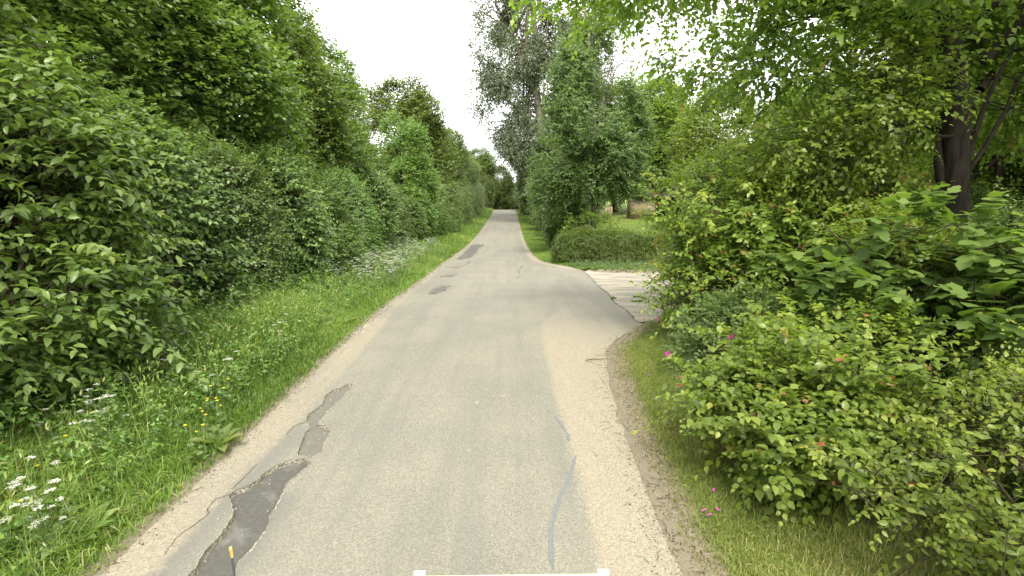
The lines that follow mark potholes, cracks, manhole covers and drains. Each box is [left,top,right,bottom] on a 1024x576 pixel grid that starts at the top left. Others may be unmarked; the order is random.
pothole [297,425,331,458]
pothole [188,455,317,576]
pothole [305,383,355,430]
